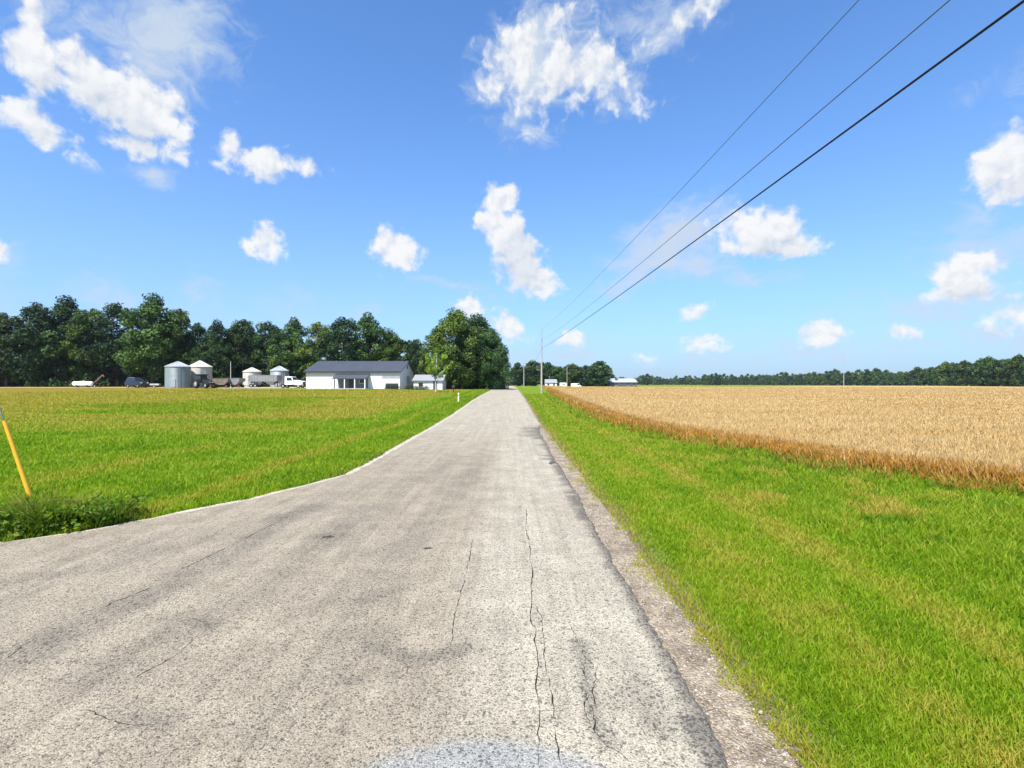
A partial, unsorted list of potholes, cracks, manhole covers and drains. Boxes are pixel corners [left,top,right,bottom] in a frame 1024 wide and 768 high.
crack [450,540,473,644]
crack [571,628,628,760]
crack [526,510,562,768]
crack [88,710,152,726]
